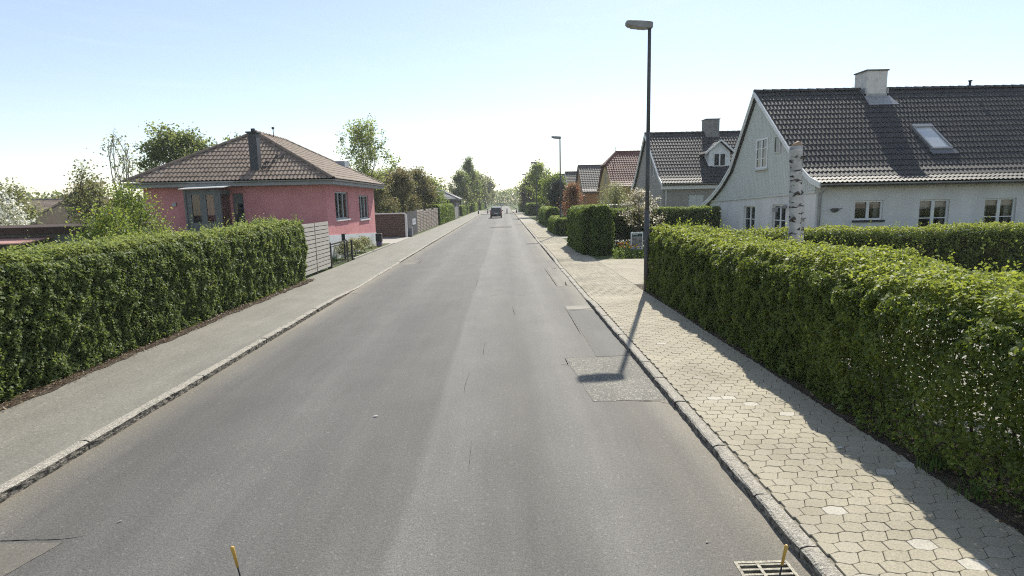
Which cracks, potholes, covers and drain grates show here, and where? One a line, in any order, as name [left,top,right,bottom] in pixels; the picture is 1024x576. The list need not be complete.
drain grate [733,560,799,576]
